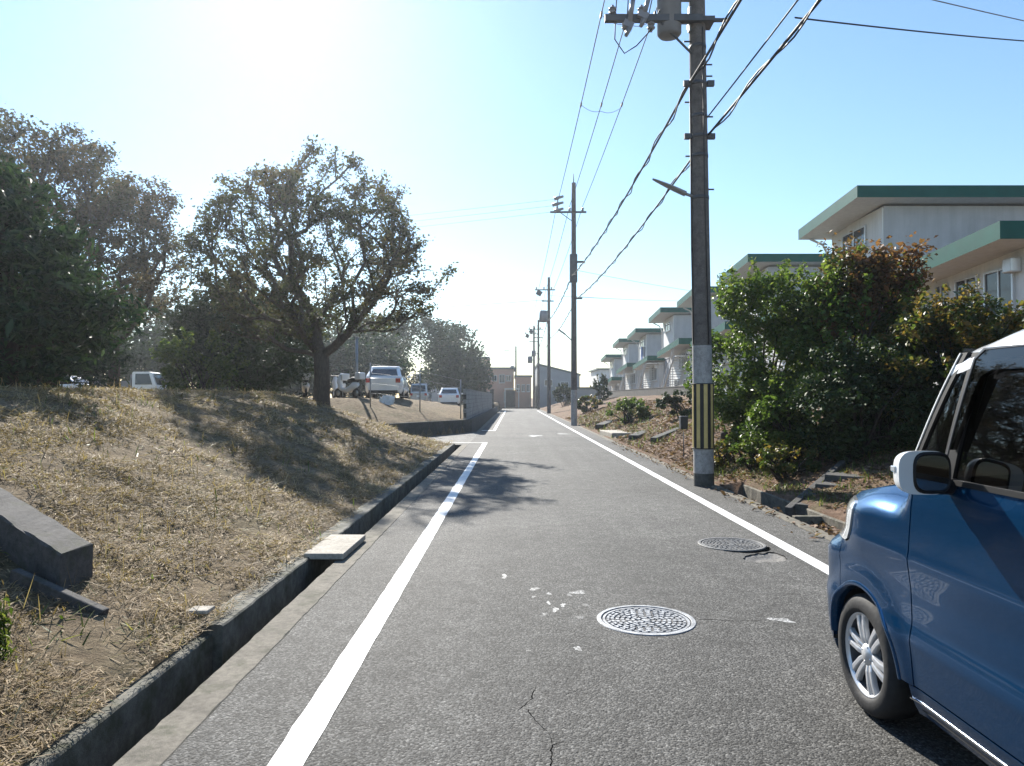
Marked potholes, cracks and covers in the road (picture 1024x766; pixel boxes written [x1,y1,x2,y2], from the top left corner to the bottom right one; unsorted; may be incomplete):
manhole cover [698,537,766,552]
manhole cover [597,605,696,636]
crack [518,686,577,766]
